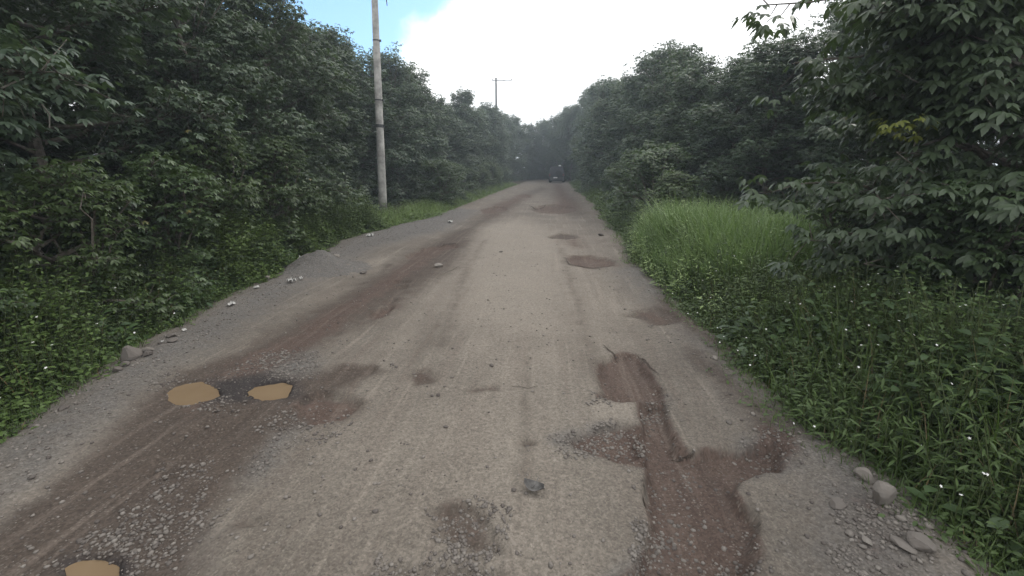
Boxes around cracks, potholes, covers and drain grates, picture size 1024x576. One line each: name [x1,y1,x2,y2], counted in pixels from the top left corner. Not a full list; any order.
pothole [323,365,383,391]
pothole [290,390,364,426]
pothole [164,381,221,405]
pothole [65,555,124,576]
pothole [635,401,790,576]
pothole [568,424,643,464]
pothole [623,308,678,326]
pothole [246,380,293,401]
pothole [568,256,615,268]
pothole [597,353,663,409]
pothole [428,501,506,555]
